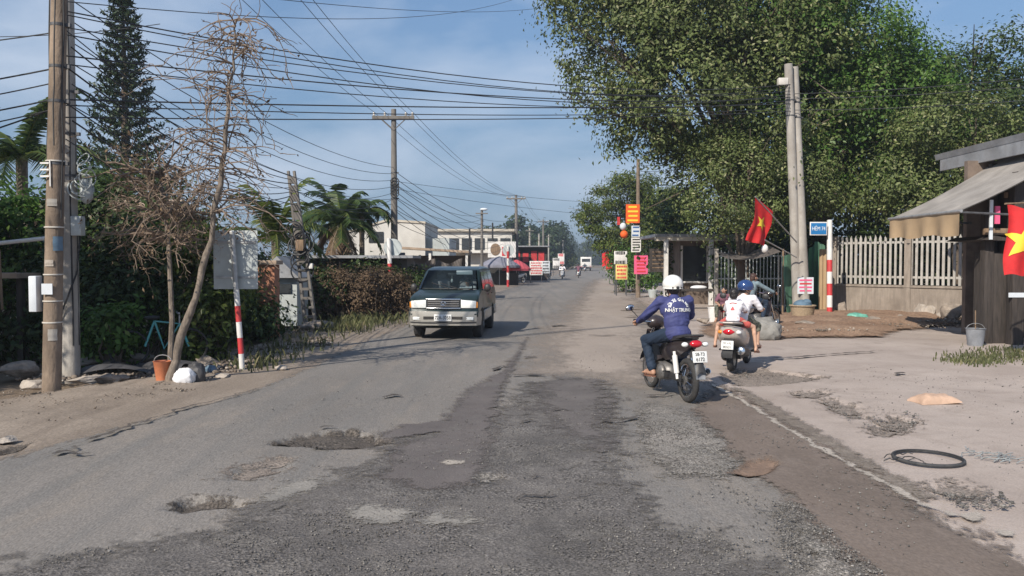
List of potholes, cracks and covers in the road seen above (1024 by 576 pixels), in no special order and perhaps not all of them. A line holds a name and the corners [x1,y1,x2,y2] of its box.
pothole [271,428,388,450]
pothole [166,493,258,514]
